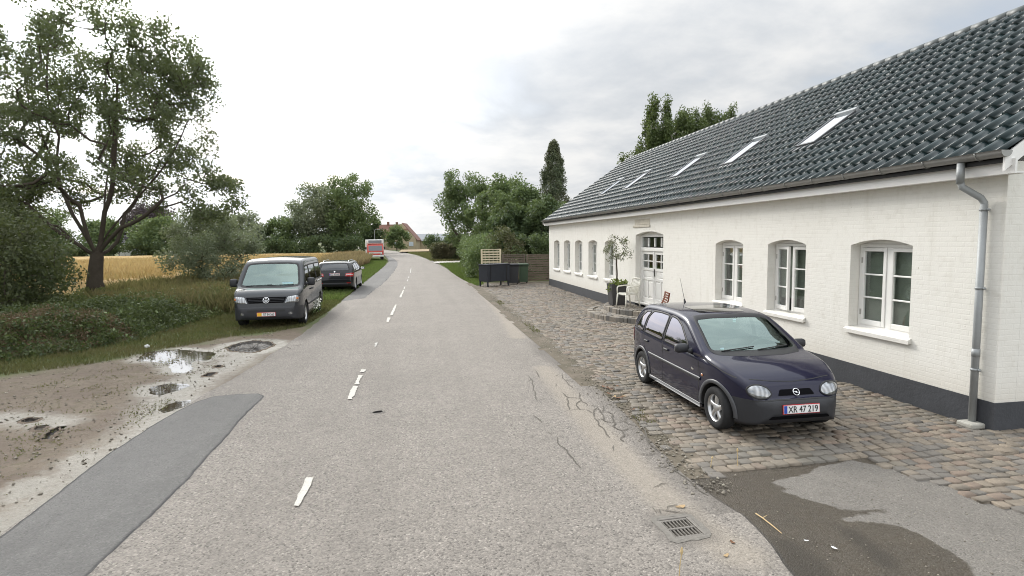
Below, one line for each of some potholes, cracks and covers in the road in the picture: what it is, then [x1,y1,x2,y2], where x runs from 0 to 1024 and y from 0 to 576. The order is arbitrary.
crack [529,370,707,495]
pothole [38,426,64,443]
pothole [223,340,276,353]
drain grate [651,513,711,543]
